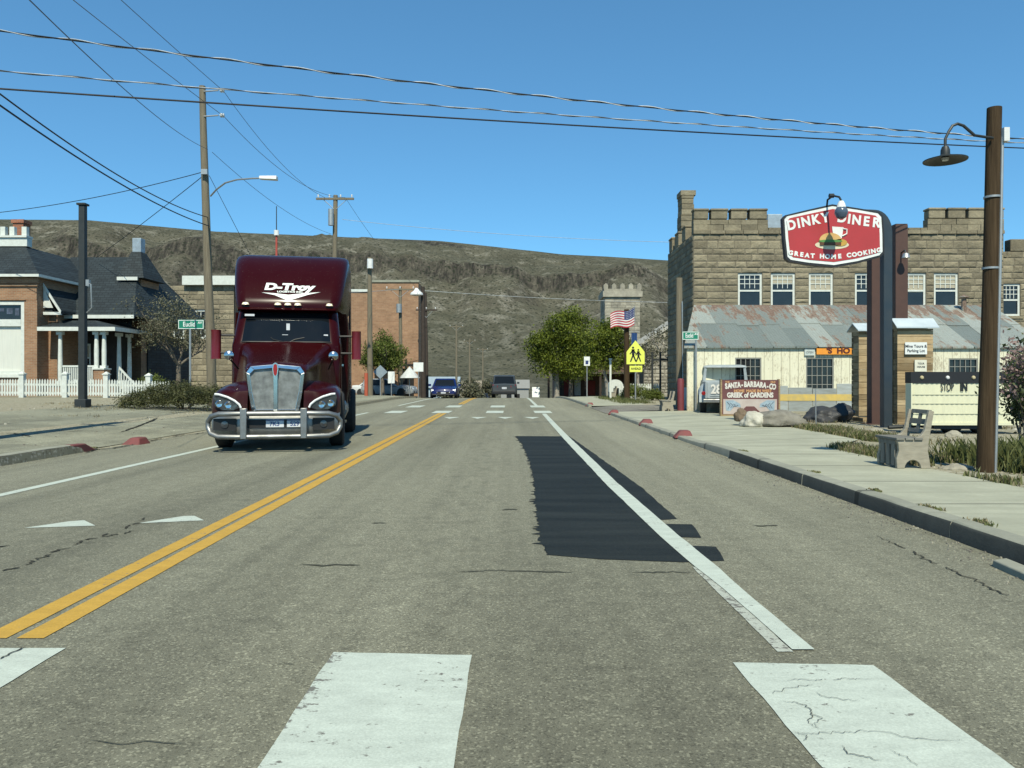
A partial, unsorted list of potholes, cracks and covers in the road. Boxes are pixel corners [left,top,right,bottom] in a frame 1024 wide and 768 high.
crack [882,538,1009,595]
crack [773,677,940,764]
crack [4,517,145,570]
